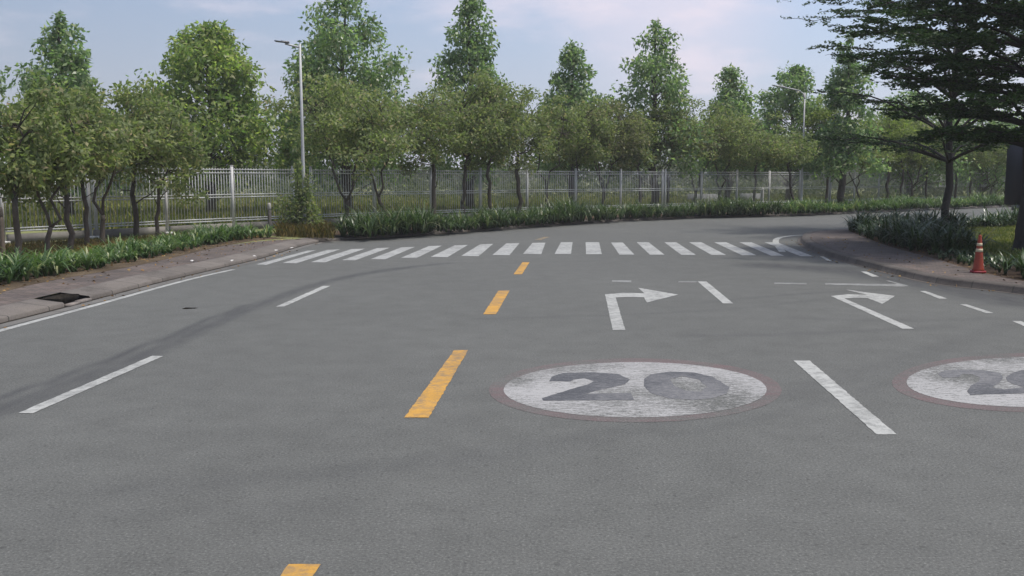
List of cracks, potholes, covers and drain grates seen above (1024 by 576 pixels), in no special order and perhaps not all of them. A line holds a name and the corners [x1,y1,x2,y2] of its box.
drain grate [40,294,92,307]
